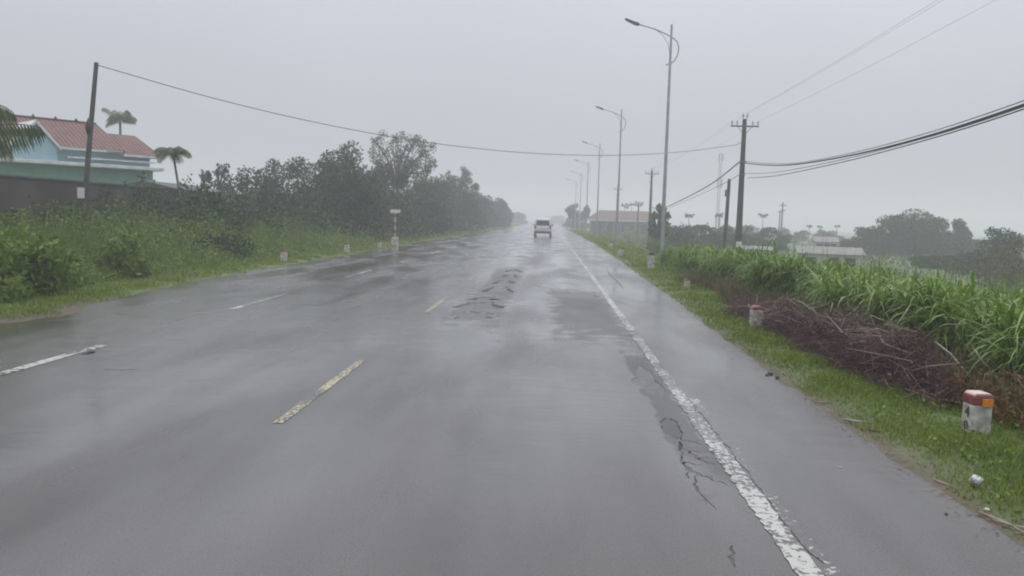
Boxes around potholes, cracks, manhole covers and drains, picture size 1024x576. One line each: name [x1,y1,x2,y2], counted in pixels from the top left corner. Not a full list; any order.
pothole [451,311,494,320]
crack [678,438,727,510]
crack [727,547,736,567]
